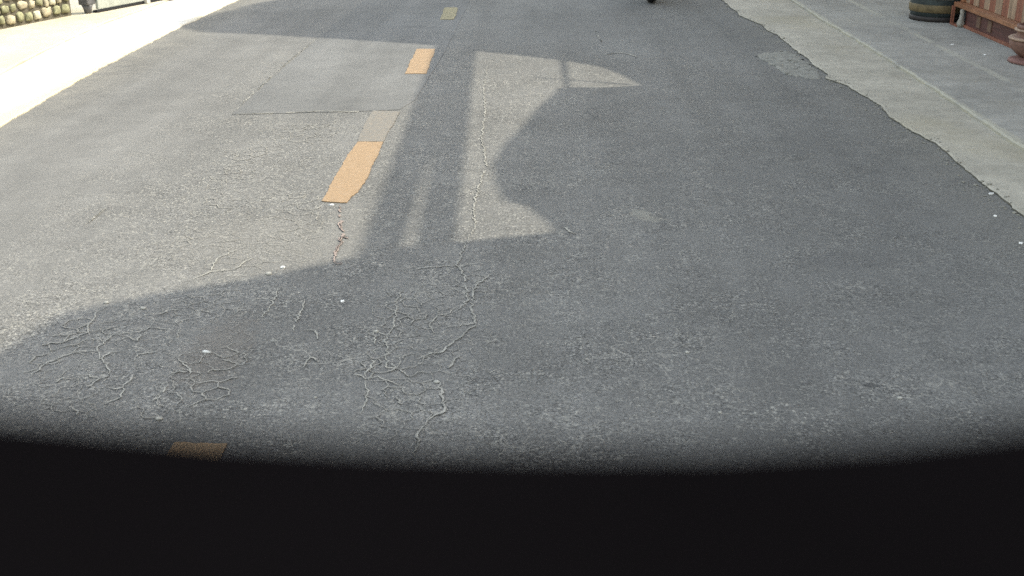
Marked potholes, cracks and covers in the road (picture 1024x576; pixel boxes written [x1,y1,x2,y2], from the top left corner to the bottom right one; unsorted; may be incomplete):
crack [25,289,252,418]
crack [333,206,348,264]
crack [355,69,494,444]
crack [262,289,318,367]
